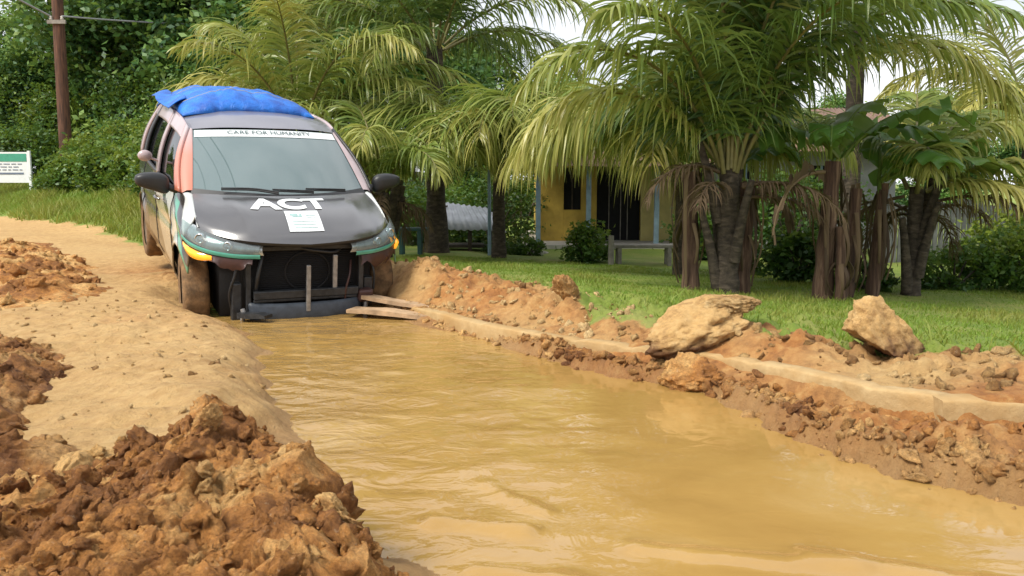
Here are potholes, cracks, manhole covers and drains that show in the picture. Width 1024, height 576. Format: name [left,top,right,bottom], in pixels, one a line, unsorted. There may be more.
pothole [132,281,1024,576]
